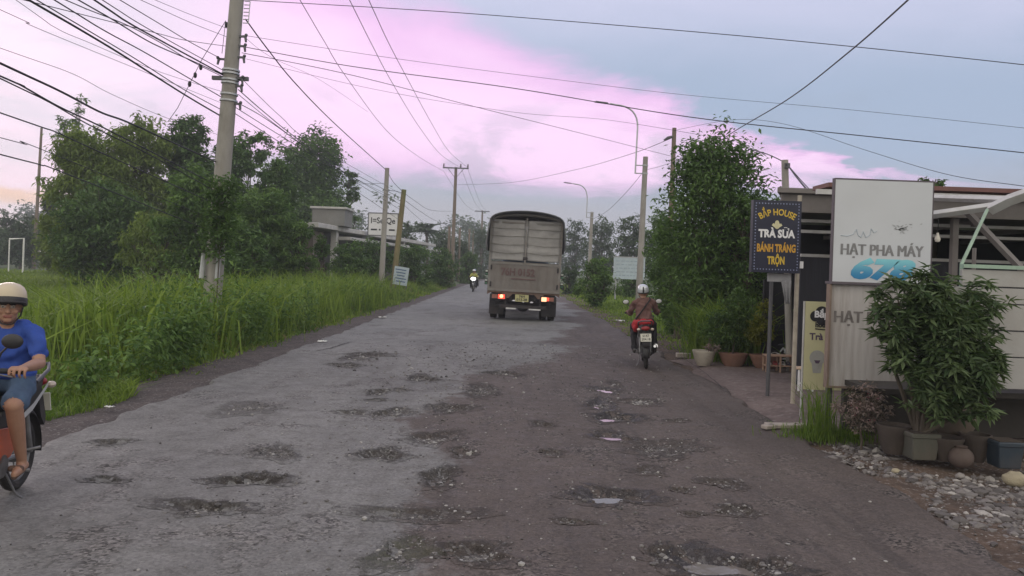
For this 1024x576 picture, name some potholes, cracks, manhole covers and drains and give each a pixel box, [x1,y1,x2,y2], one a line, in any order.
pothole [75,473,133,484]
pothole [675,510,712,518]
pothole [527,419,559,428]
pothole [319,408,373,417]
pothole [366,404,422,417]
pothole [348,527,464,576]
pothole [549,516,599,525]
pothole [579,394,623,420]
pothole [533,447,576,458]
pothole [127,493,266,523]
pothole [149,469,328,488]
pothole [541,481,687,513]
